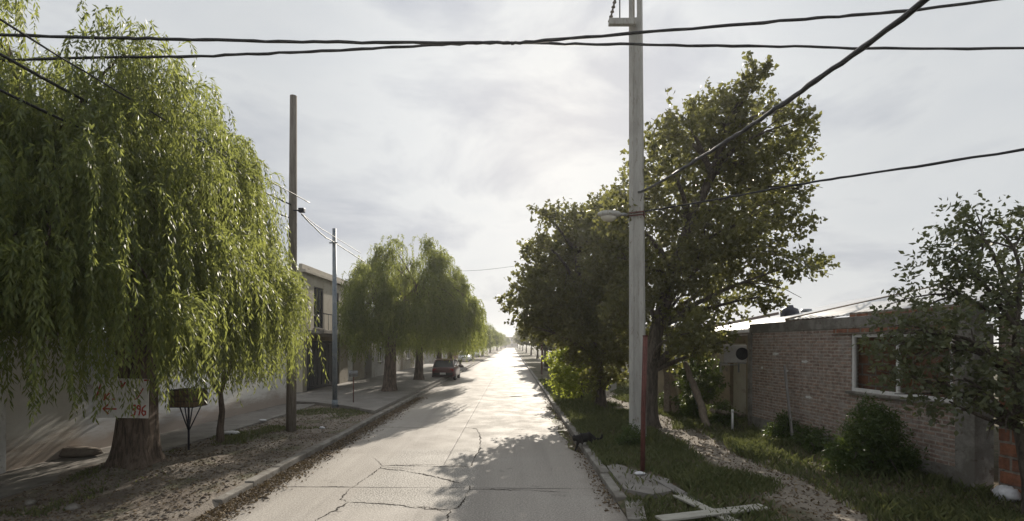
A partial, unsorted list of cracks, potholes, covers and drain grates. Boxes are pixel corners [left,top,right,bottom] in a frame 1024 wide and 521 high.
crack [291,427,568,521]
